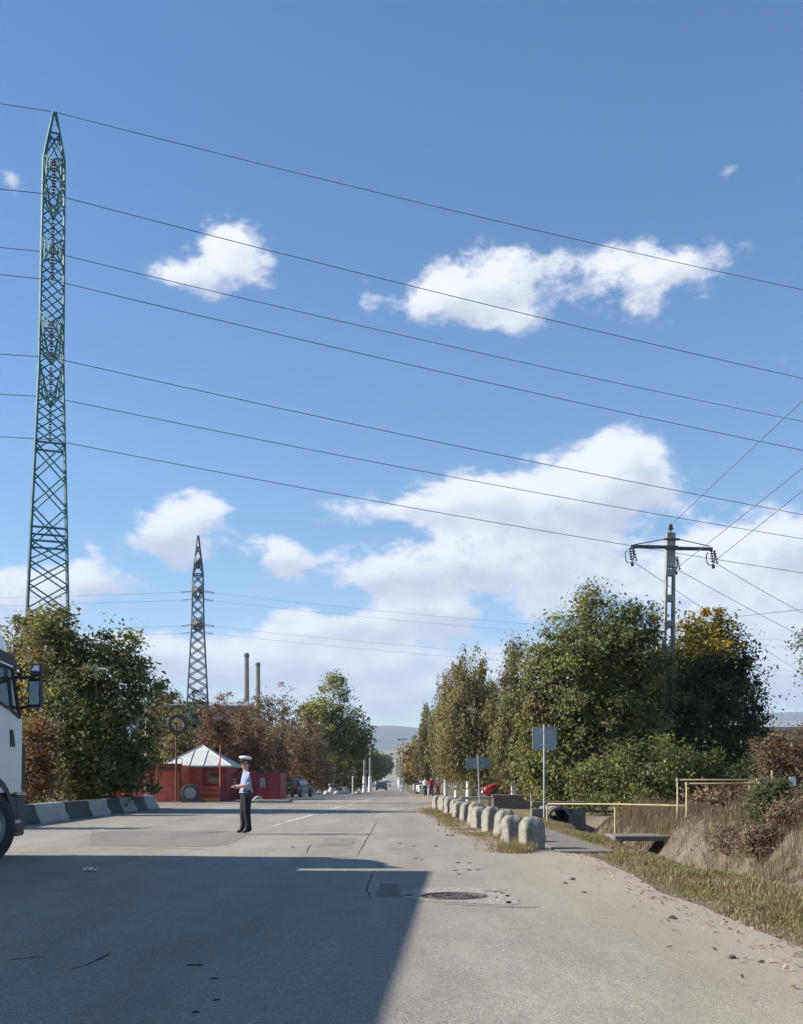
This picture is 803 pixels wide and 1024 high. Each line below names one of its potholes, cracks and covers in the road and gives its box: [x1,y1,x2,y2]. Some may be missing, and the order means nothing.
manhole cover [419,892,488,900]
crack [71,953,110,970]
